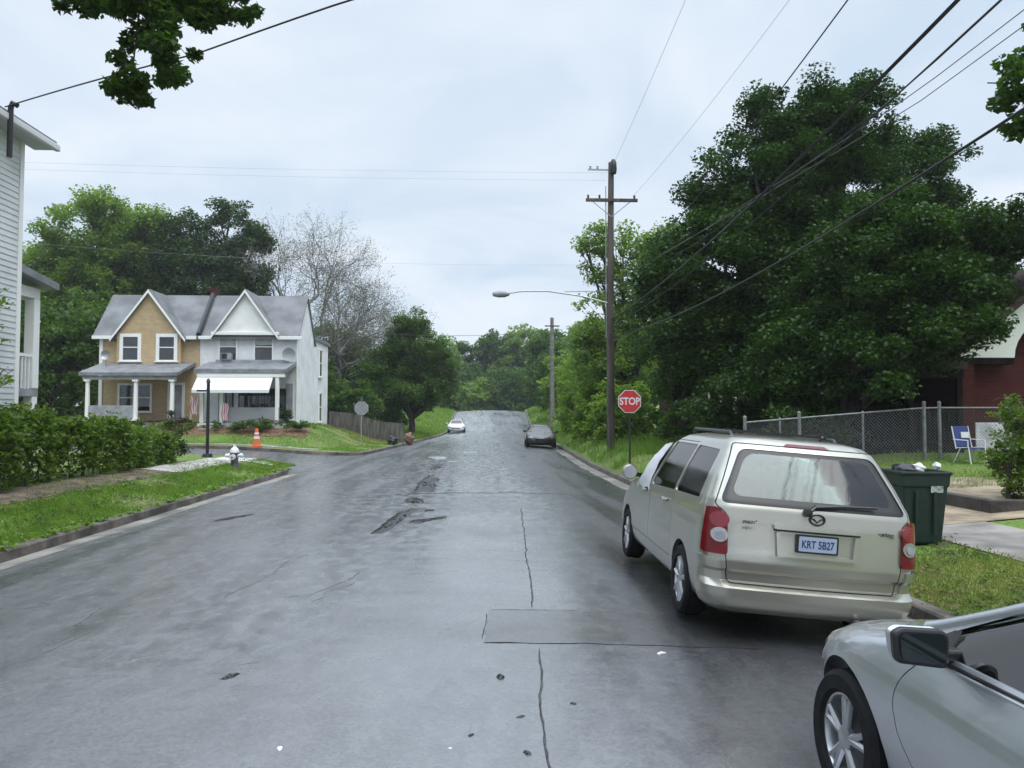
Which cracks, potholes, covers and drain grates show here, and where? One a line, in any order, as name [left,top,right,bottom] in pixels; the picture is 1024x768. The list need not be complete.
crack [395,492,666,768]
crack [225,555,360,601]
pothole [413,475,440,492]
pothole [371,508,421,534]
crack [15,594,127,662]
